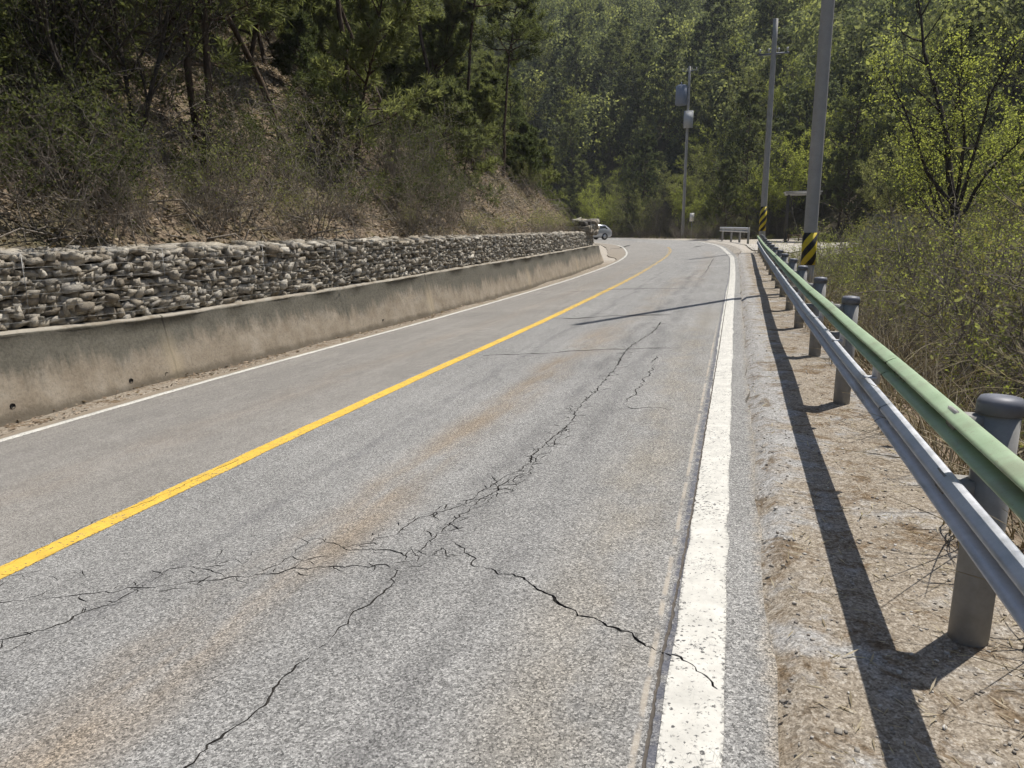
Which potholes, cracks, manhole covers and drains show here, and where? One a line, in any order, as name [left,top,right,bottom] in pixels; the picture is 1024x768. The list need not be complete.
crack [0,323,716,768]
